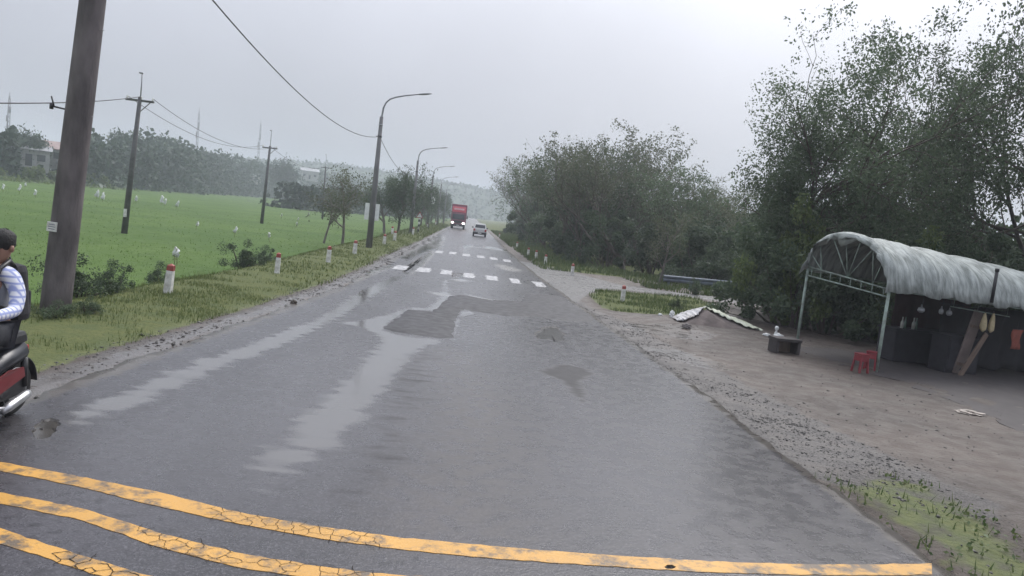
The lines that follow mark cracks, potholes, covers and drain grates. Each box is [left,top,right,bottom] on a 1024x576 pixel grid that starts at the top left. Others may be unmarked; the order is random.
pothole [535,326,566,342]
crack [210,507,380,548]
crack [138,526,374,576]
pothole [31,418,61,440]
crack [51,551,139,576]
